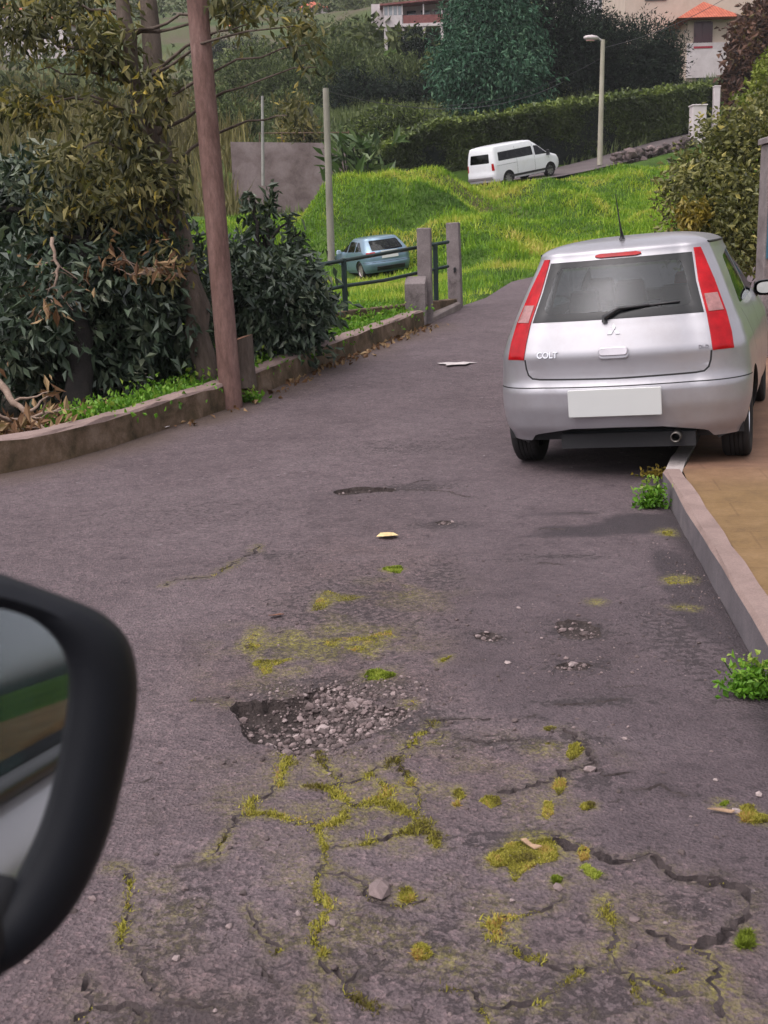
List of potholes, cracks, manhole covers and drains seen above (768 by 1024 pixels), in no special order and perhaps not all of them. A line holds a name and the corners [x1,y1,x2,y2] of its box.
pothole [333,486,396,495]
pothole [555,619,603,640]
pothole [554,661,594,671]
pothole [473,631,504,642]
crack [73,685,752,1024]
crack [164,545,262,586]
pothole [230,682,414,757]
